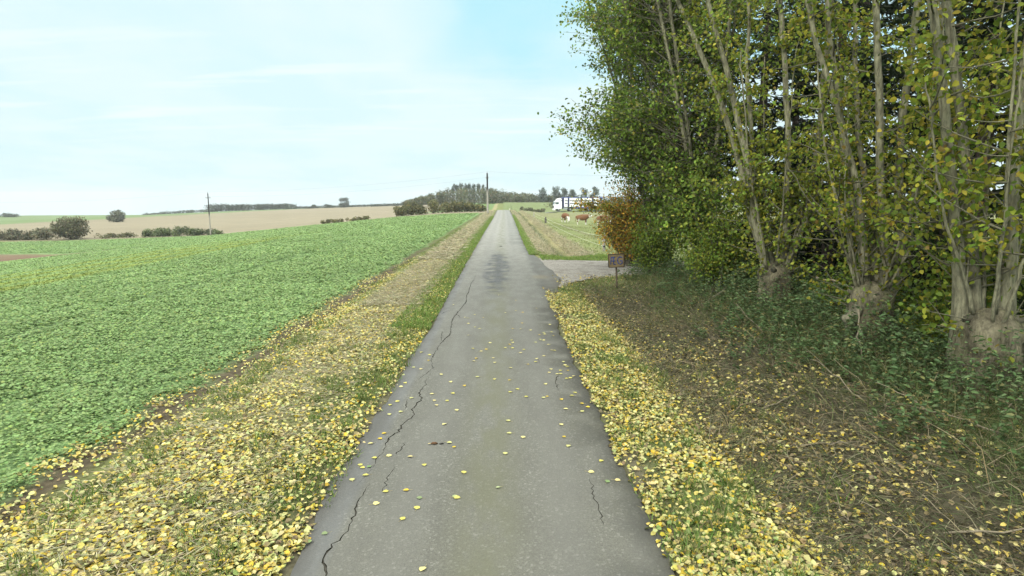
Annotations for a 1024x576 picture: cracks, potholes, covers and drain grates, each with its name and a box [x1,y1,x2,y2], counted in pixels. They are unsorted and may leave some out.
crack [322,275,476,576]
